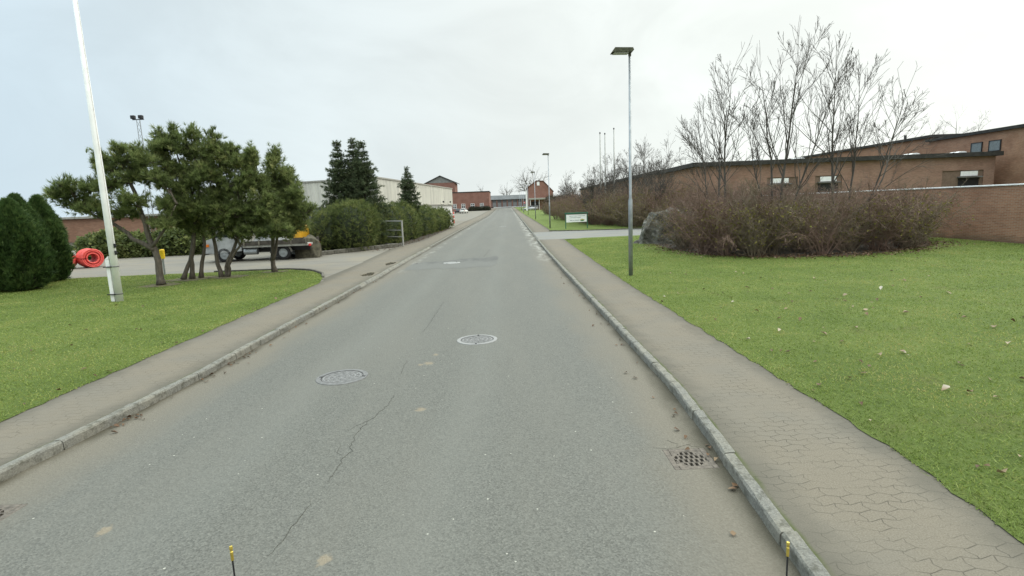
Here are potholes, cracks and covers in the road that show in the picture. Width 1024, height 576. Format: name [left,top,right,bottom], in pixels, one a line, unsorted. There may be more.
drain grate [662,448,720,470]
manhole cover [316,369,368,385]
crack [269,303,443,555]
manhole cover [457,335,497,345]
